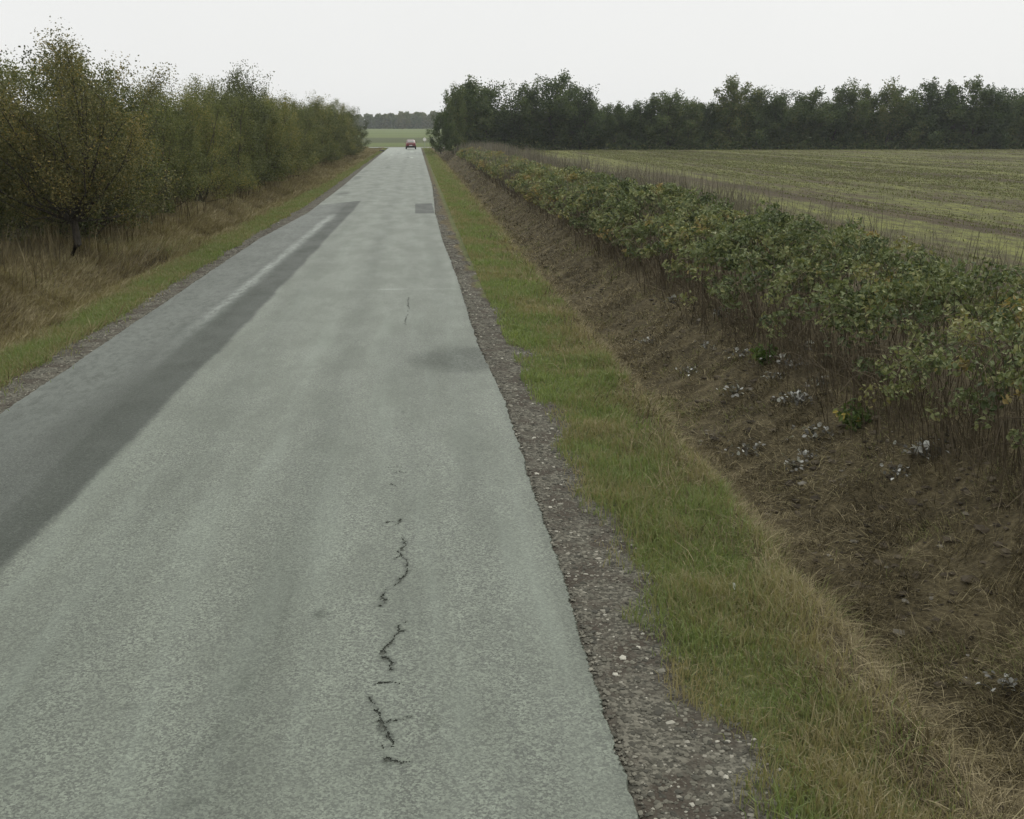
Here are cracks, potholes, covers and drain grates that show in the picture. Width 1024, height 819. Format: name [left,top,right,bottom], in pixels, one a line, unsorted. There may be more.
crack [379,519,409,607]
crack [369,621,412,764]
